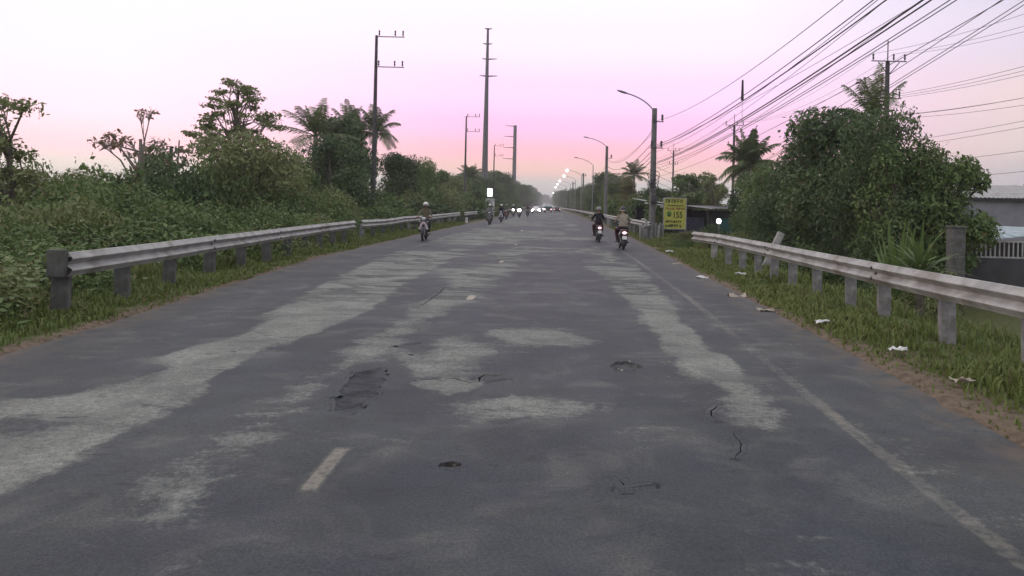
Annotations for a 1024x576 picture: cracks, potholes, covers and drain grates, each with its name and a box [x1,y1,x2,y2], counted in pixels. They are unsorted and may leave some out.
crack [414,287,449,307]
crack [705,403,749,460]
pothole [605,360,649,374]
pothole [428,459,471,472]
crack [604,474,658,494]
crack [395,343,513,384]
pothole [330,367,391,416]
